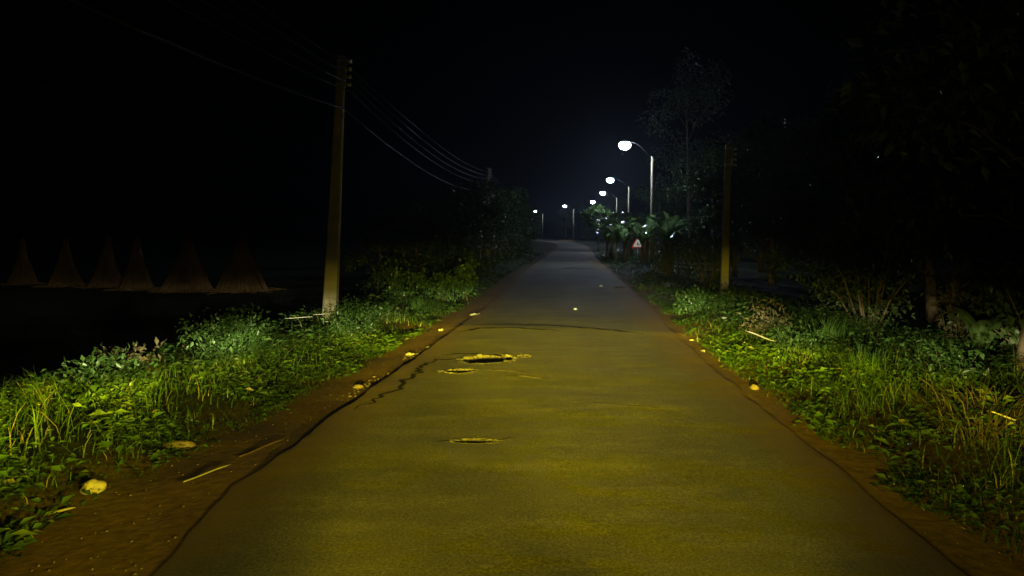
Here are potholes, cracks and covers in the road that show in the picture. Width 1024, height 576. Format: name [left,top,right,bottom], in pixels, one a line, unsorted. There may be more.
pothole [456,353,518,365]
crack [458,324,643,334]
crack [355,353,549,409]
